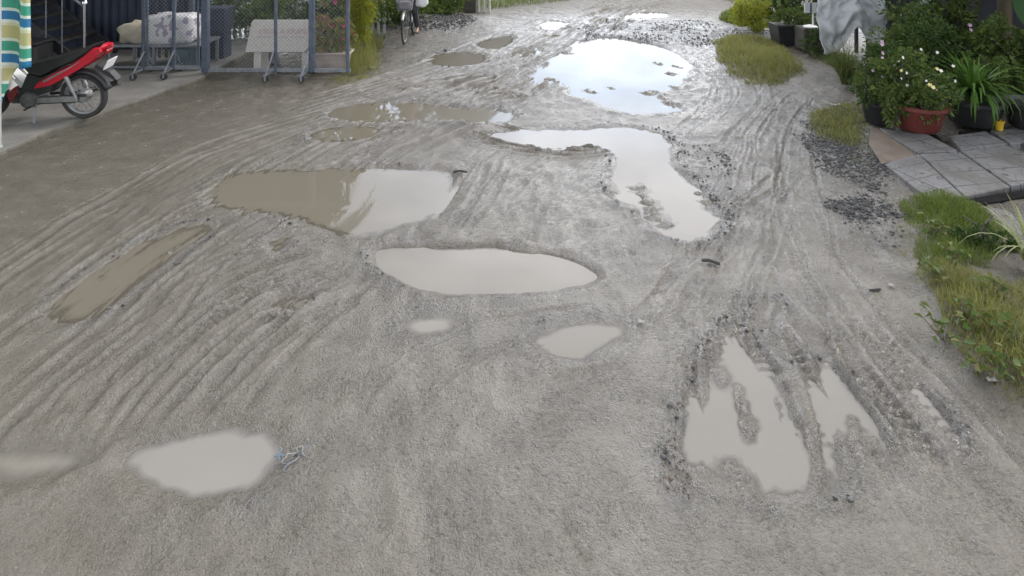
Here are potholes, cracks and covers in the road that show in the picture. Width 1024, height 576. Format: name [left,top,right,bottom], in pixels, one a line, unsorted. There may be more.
pothole [476,121,743,249]
pothole [188,159,471,247]
pothole [515,305,648,378]
pothole [521,35,703,117]
pothole [318,96,524,127]
pothole [787,346,908,517]
pothole [650,313,838,525]
pothole [353,233,619,304]
pothole [88,398,315,526]
